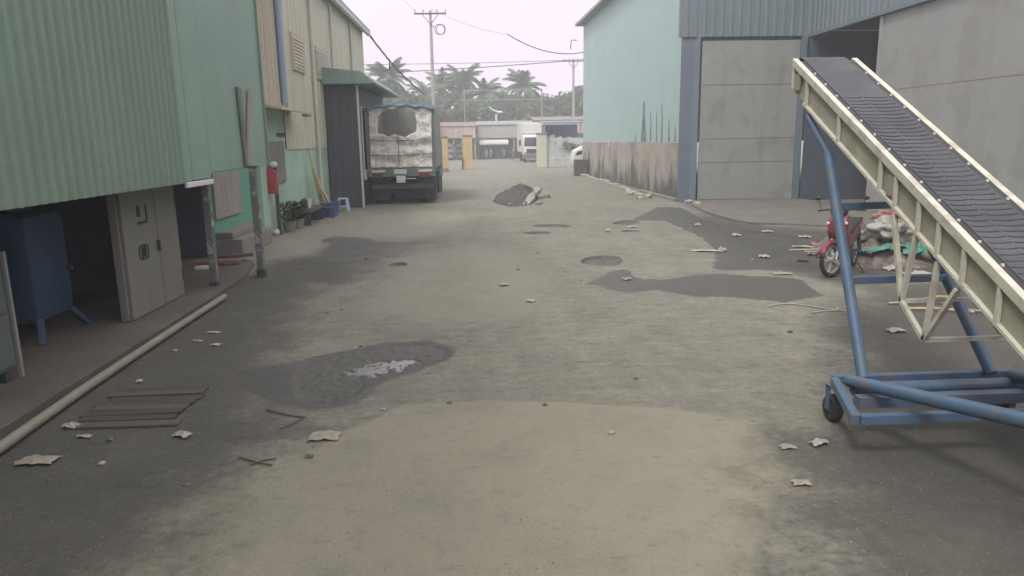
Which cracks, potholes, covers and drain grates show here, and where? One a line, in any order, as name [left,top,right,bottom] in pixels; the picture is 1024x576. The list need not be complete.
pothole [580,255,623,266]
pothole [289,341,454,406]
